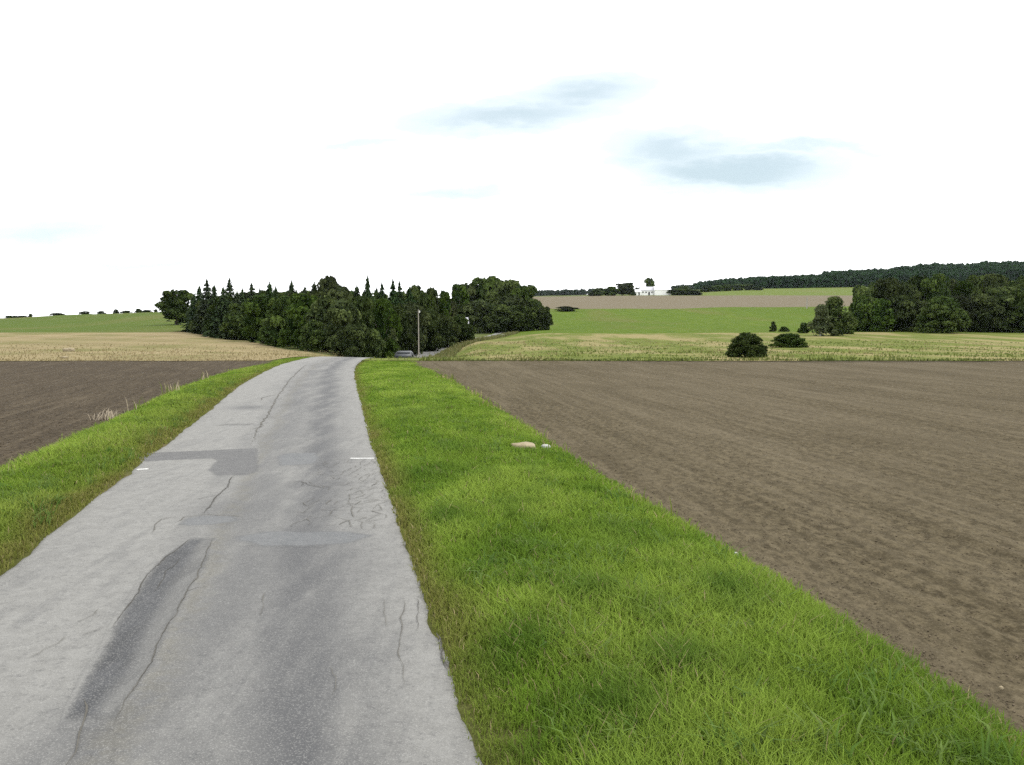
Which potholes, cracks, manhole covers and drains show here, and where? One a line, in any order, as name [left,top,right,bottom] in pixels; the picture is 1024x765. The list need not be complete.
crack [154,476,233,529]
crack [224,365,306,442]
crack [292,458,387,529]
crack [32,541,212,722]
crack [384,599,419,686]
